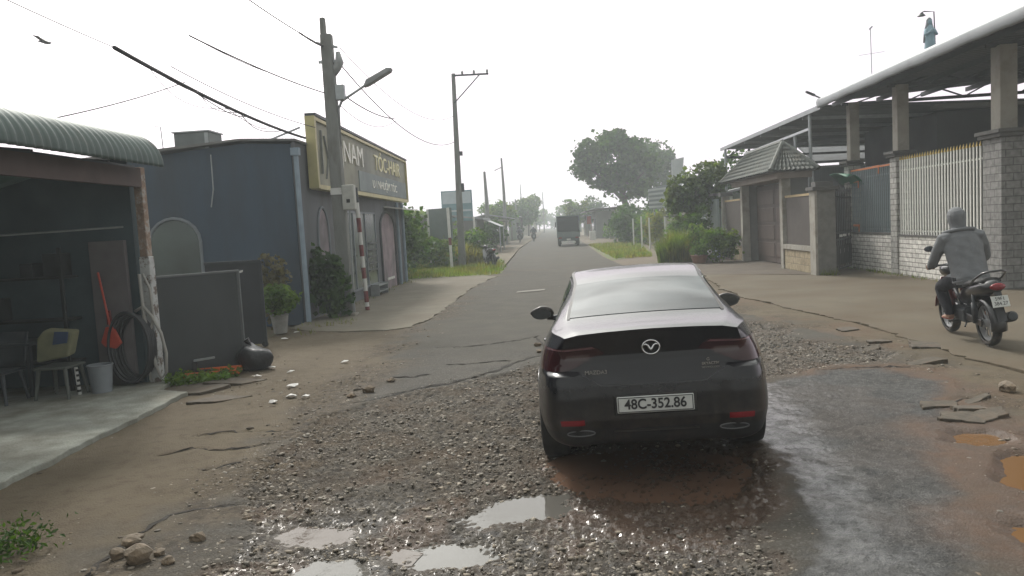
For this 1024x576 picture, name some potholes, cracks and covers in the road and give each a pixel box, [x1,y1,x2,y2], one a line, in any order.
crack [84,504,267,576]
pothole [934,425,1024,447]
crack [354,336,544,403]
pothole [188,362,801,576]
pothole [982,445,1024,491]
crack [160,429,298,471]
